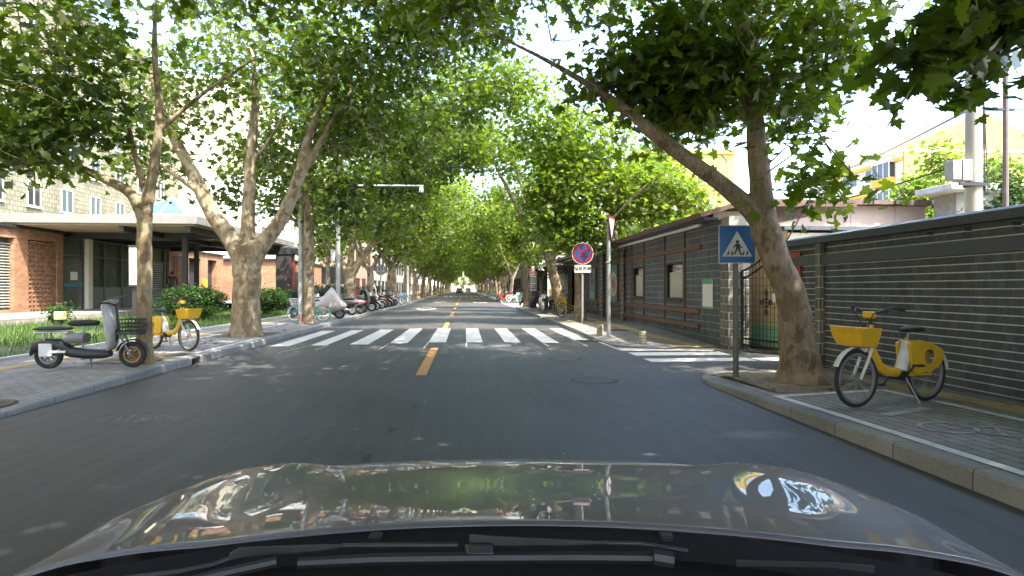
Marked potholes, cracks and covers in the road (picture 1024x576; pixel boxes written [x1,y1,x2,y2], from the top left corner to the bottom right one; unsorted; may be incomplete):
manhole cover [0,399,19,407]
